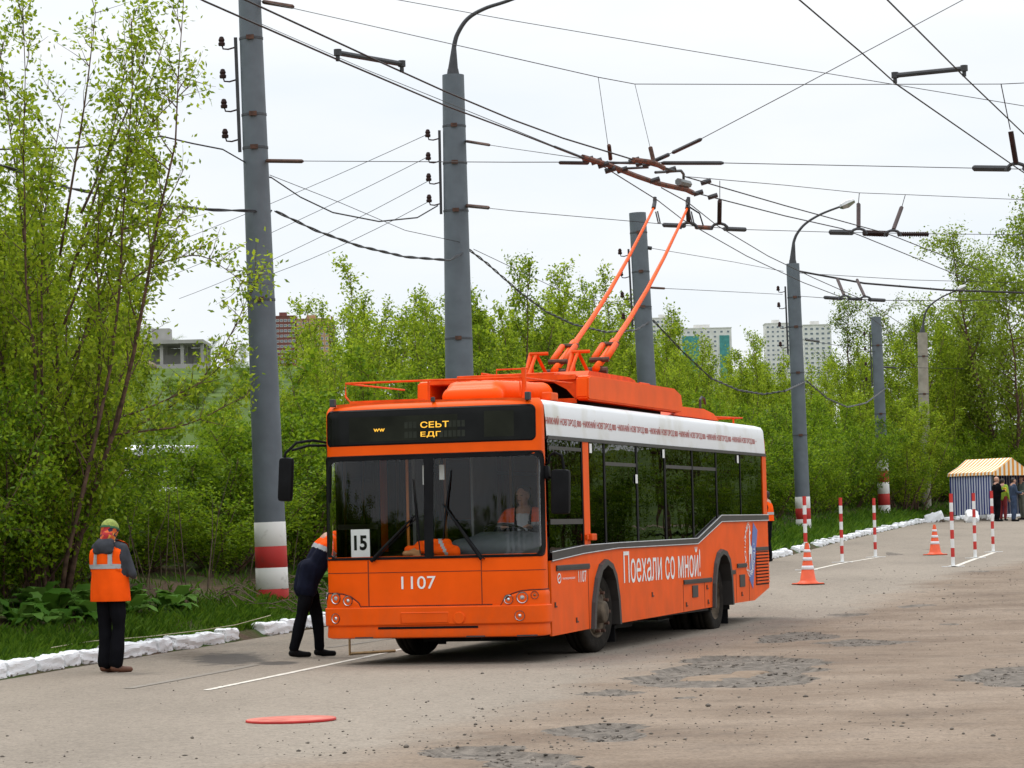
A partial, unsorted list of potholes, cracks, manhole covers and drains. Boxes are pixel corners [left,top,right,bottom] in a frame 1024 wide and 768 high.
pothole [615,655,838,688]
pothole [812,639,921,647]
pothole [541,722,651,742]
pothole [755,632,841,643]
pothole [945,666,1024,687]
pothole [417,744,595,768]
